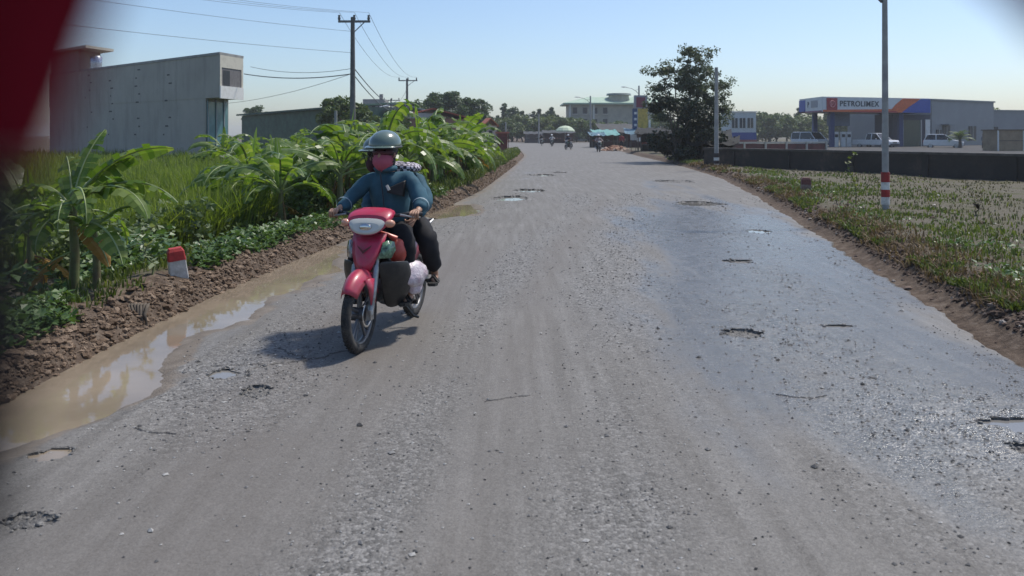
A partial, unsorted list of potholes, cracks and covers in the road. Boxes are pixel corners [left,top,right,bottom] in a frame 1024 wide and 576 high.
crack [134,427,176,435]
pothole [229,379,282,402]
pothole [0,507,76,536]
pothole [710,327,779,341]
pothole [200,365,244,383]
pothole [18,442,83,466]
pothole [942,413,1024,435]
